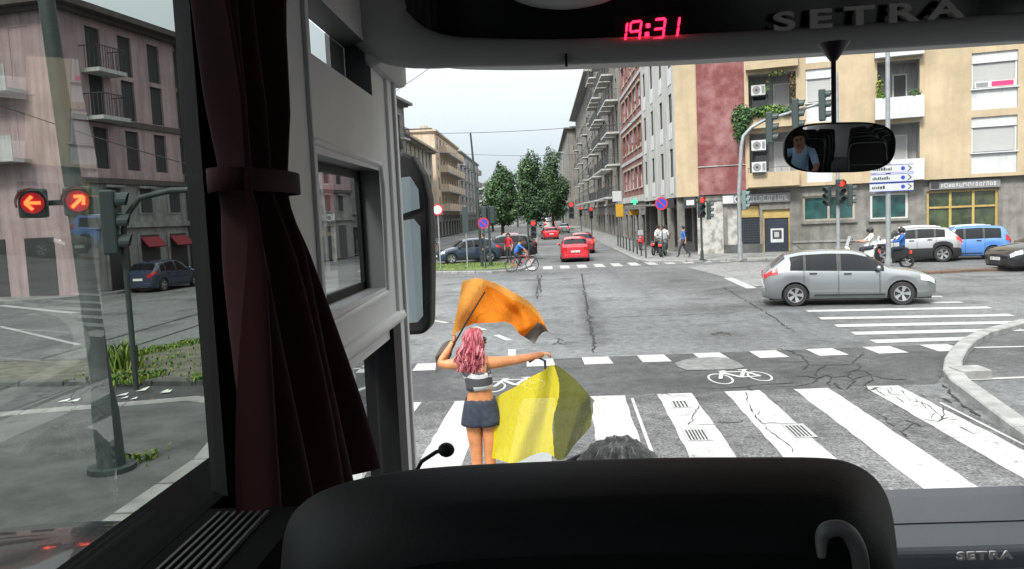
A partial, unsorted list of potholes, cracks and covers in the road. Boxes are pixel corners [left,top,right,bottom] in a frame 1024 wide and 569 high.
drain grate [781,423,818,438]
drain grate [671,400,692,408]
drain grate [682,428,713,441]
crack [660,348,993,461]
